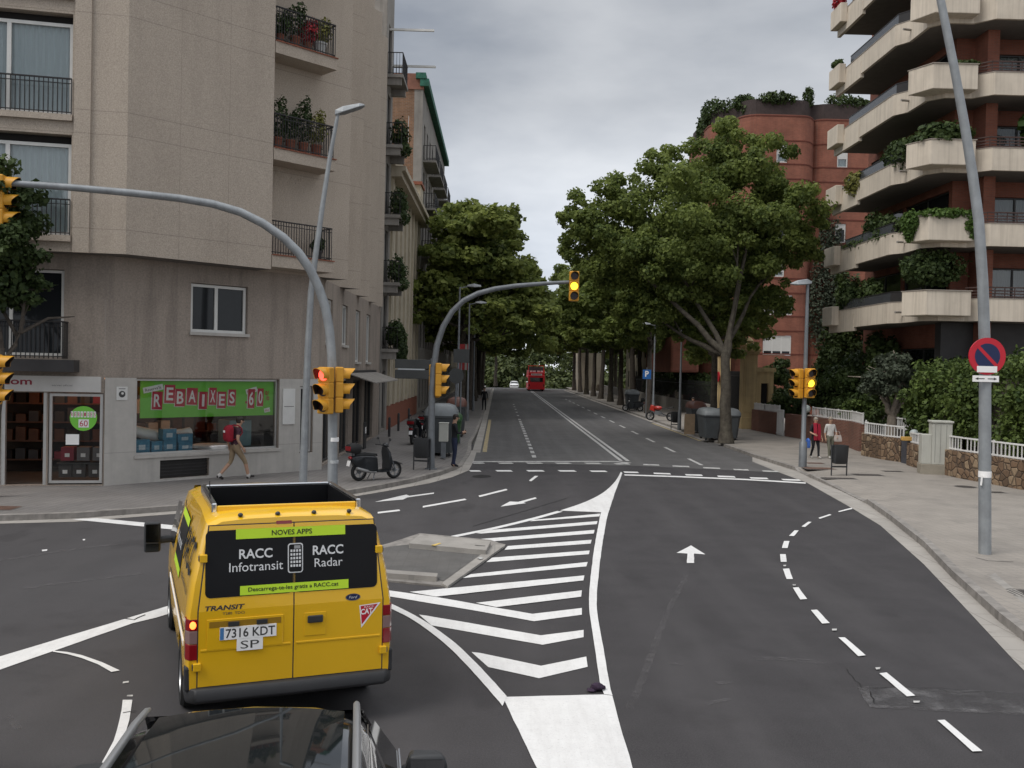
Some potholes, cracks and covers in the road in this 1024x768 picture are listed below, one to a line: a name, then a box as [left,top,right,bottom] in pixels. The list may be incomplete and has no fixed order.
crack [847,669,991,703]
